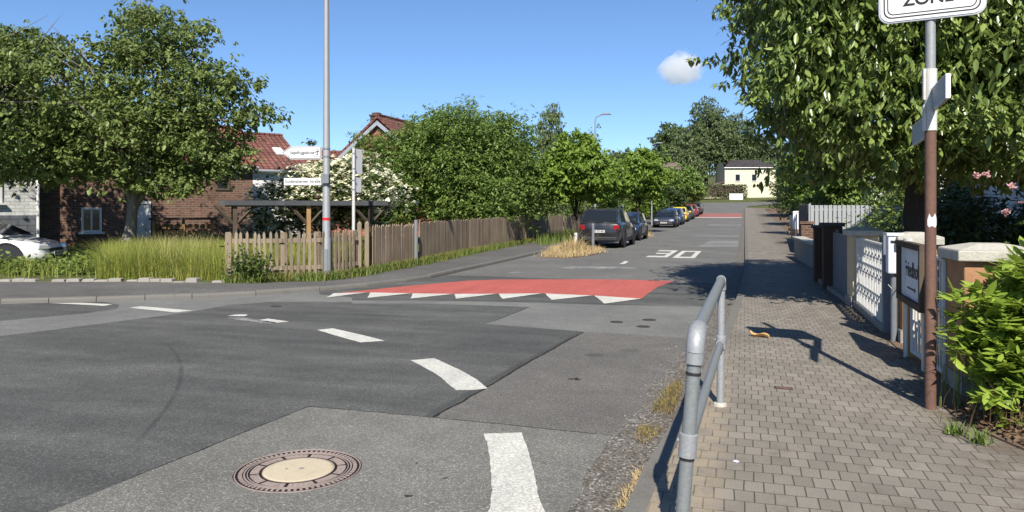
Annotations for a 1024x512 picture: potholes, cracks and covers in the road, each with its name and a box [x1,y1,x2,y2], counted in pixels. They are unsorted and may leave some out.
manhole cover [233,449,362,493]
